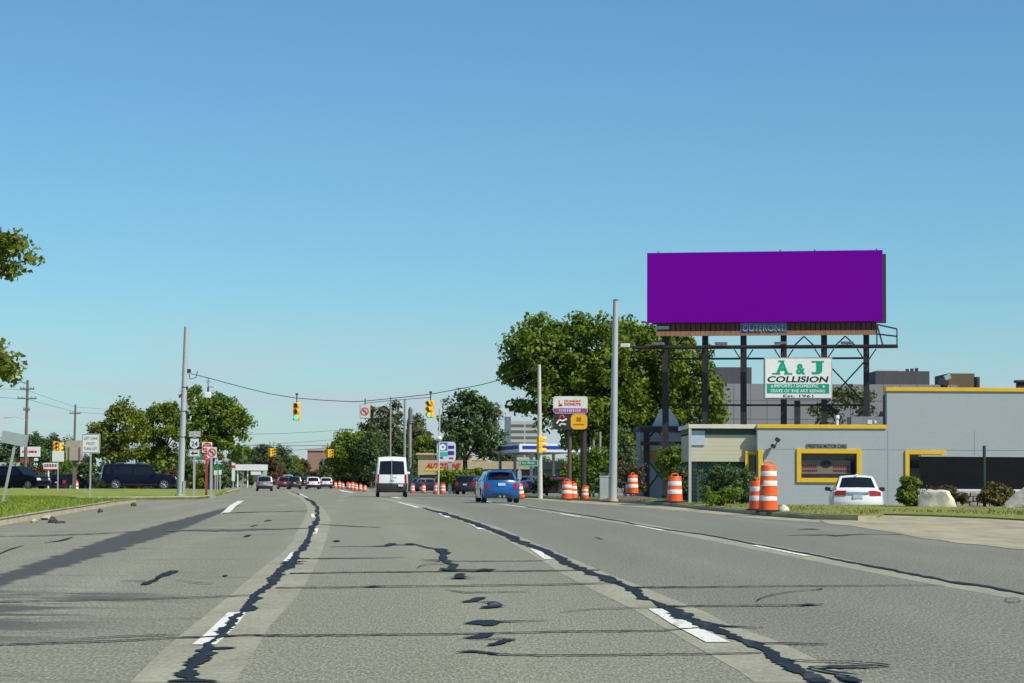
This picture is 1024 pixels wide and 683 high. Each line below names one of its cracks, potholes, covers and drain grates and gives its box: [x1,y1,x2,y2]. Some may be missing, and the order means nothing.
crack [276,500,1024,606]
